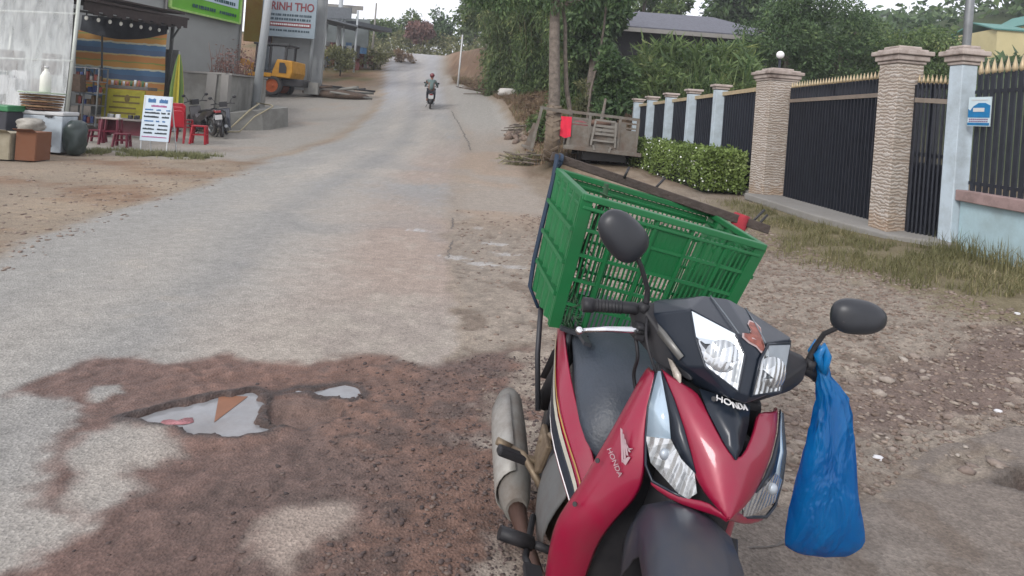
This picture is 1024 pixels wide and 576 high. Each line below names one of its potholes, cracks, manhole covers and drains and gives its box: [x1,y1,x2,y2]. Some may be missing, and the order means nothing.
pothole [106,386,284,442]
pothole [272,380,371,402]
